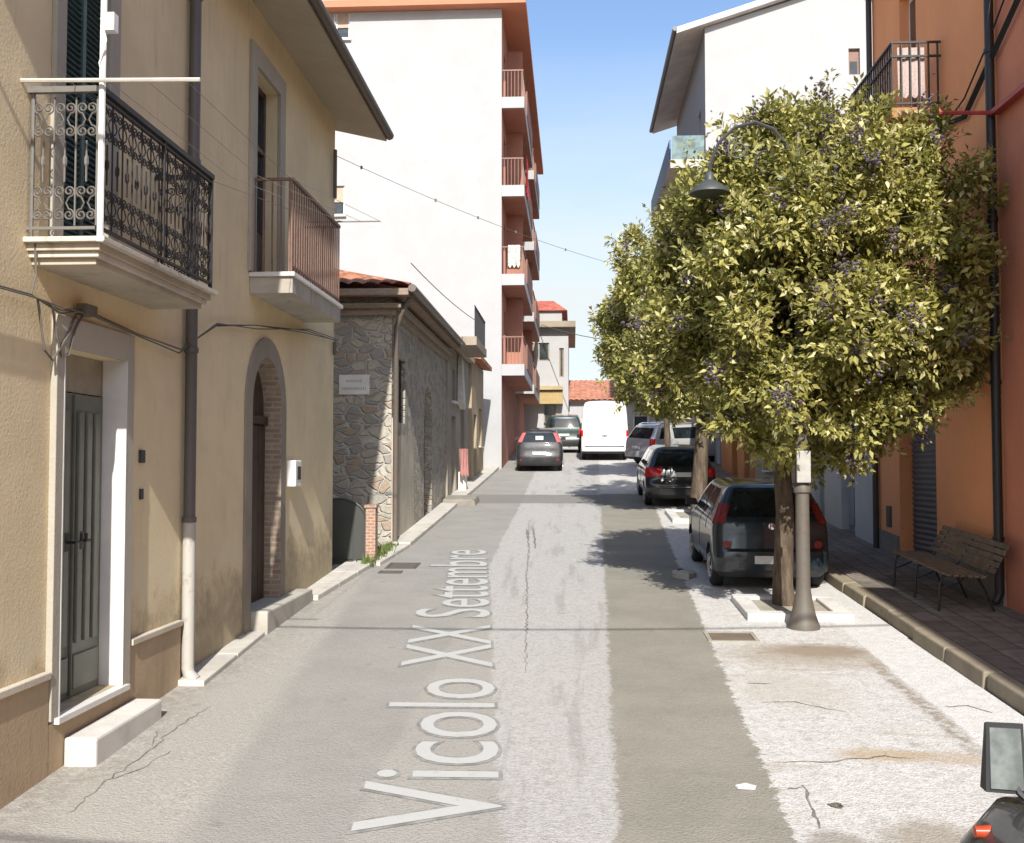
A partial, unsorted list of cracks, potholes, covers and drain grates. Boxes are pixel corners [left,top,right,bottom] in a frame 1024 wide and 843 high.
crack [788,785,820,828]
manhole cover [703,631,761,642]
crack [68,710,205,813]
crack [524,521,536,670]
